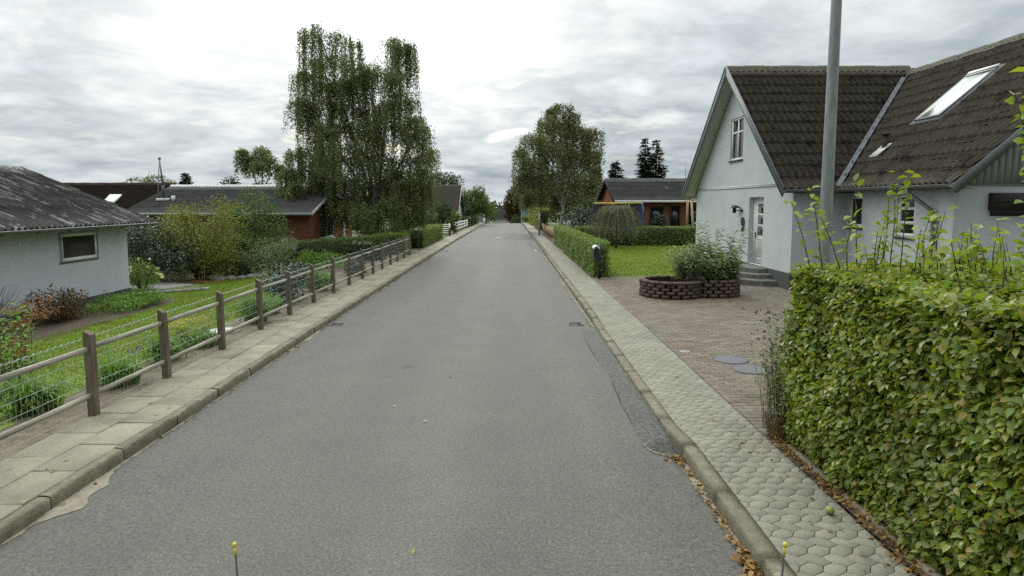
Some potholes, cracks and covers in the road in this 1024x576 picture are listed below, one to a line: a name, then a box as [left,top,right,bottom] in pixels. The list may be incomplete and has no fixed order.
manhole cover [730,364,771,375]
manhole cover [712,355,749,365]
